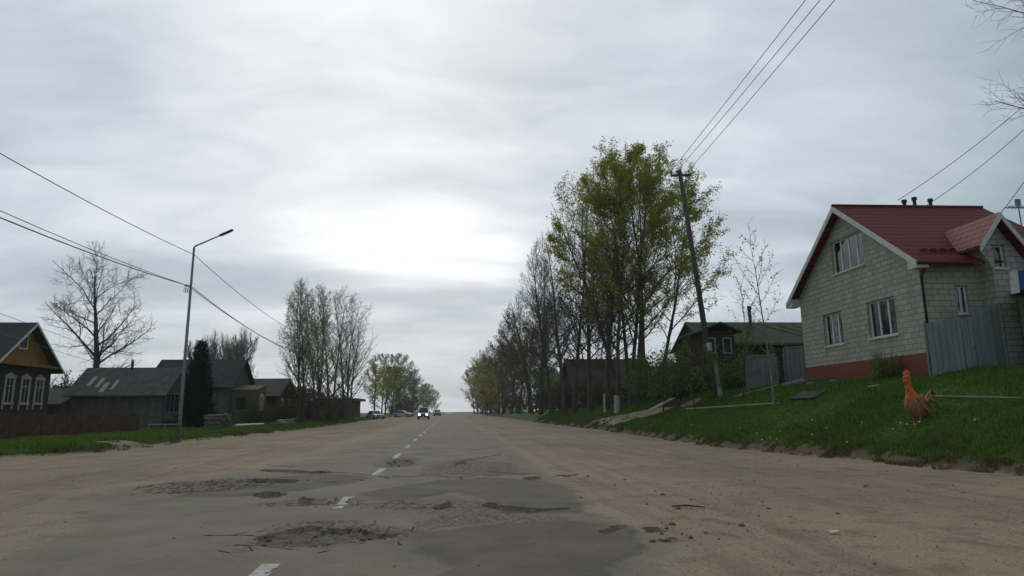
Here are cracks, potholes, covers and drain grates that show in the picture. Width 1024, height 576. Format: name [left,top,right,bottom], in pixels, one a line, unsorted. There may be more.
pothole [597,525,629,535]
pothole [252,526,402,548]
pothole [252,491,288,499]
pothole [431,498,455,510]
pothole [475,500,573,514]
